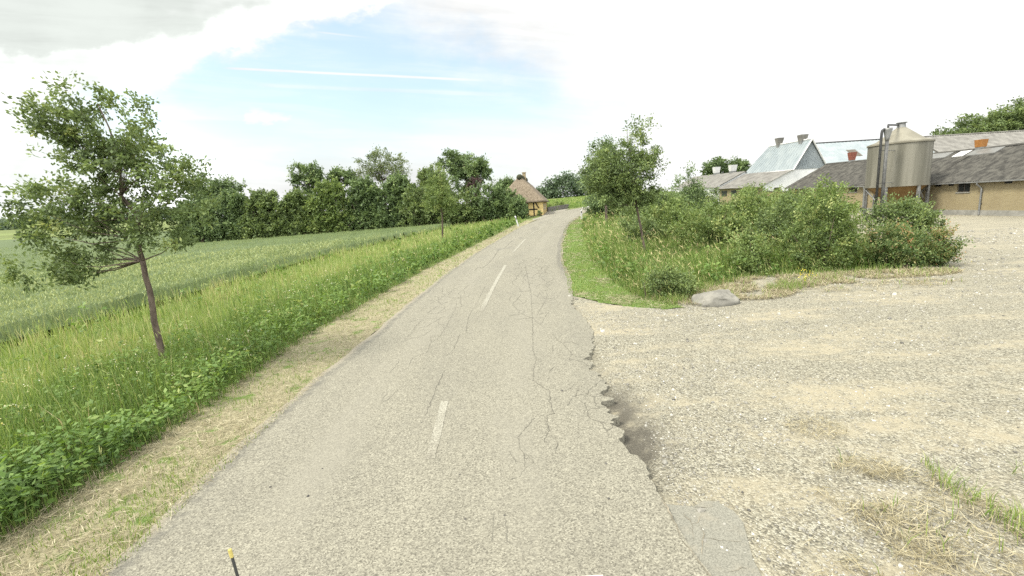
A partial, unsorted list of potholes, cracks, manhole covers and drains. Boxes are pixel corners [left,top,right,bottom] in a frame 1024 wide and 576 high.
crack [386,240,513,412]
crack [509,257,613,479]
